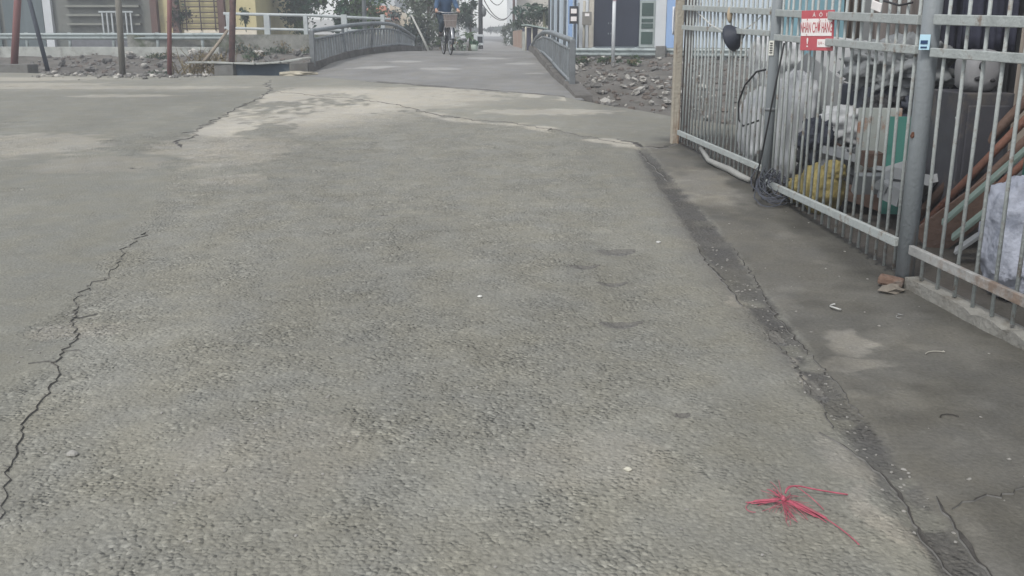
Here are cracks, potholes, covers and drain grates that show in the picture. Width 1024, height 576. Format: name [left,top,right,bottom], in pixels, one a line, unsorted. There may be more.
crack [172,80,273,147]
crack [697,247,1024,576]
crack [0,232,148,520]
